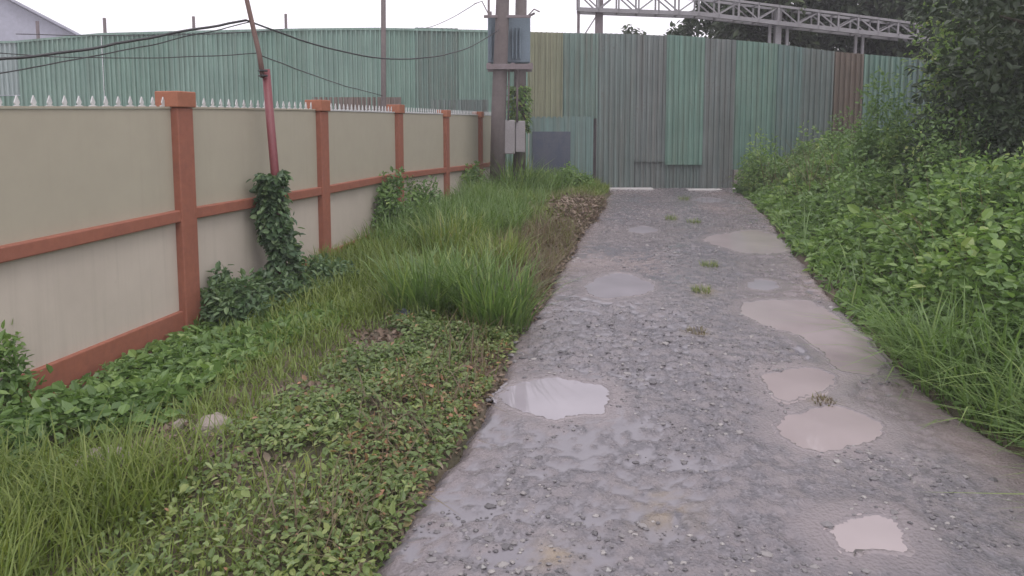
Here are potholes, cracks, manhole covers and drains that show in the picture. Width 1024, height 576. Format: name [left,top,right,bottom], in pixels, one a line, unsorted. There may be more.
pothole [700,230,792,254]
pothole [745,279,782,291]
pothole [822,512,916,557]
pothole [771,403,890,455]
pothole [627,226,660,234]
pothole [582,273,657,299]
pothole [489,375,616,423]
pothole [757,366,840,405]
pothole [737,299,893,377]
